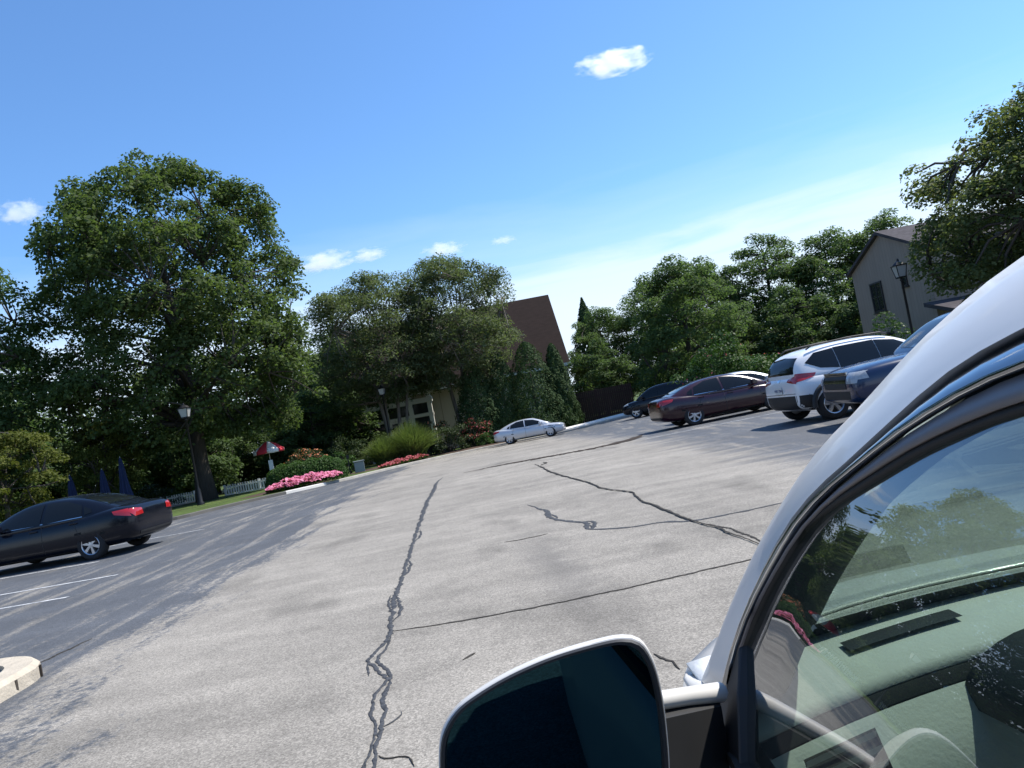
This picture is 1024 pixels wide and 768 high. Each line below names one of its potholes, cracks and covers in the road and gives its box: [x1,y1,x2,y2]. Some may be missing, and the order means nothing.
crack [361,462,761,768]
